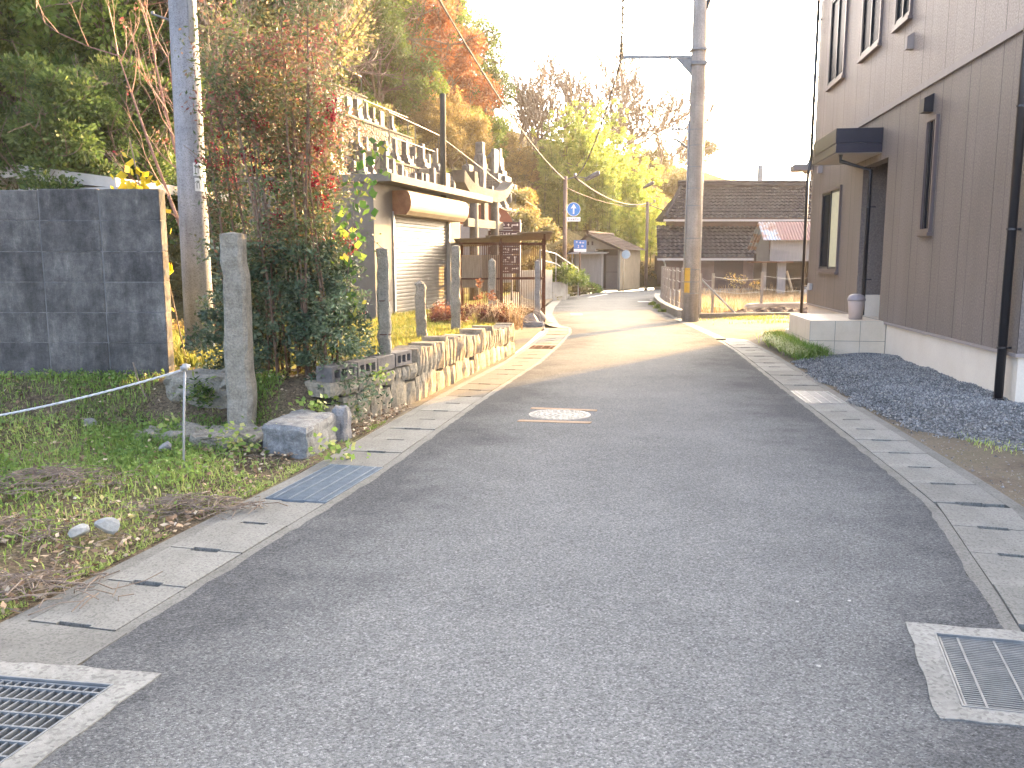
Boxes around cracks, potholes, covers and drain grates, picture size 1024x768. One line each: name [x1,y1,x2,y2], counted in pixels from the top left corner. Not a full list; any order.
drain grate [791,390,848,404]
manhole cover [529,409,591,420]
drain grate [266,464,384,504]
